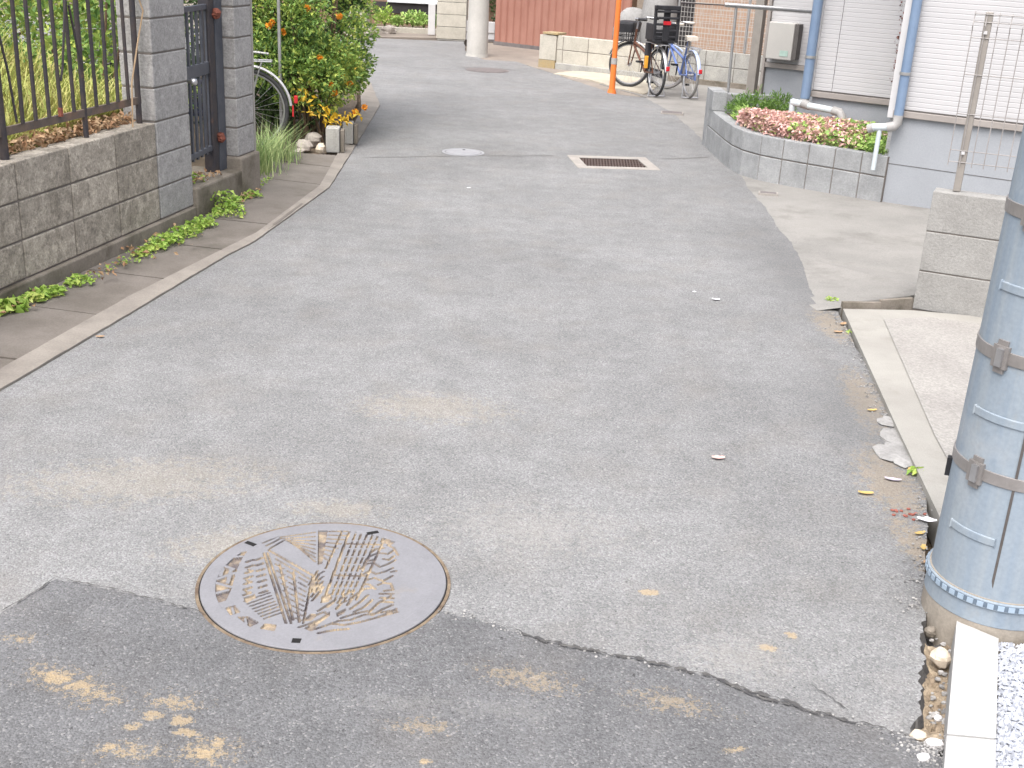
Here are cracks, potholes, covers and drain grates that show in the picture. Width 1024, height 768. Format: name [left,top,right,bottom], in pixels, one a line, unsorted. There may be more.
drain grate [567,155,660,170]
manhole cover [442,148,484,156]
manhole cover [195,522,451,654]
crack [498,623,911,736]
